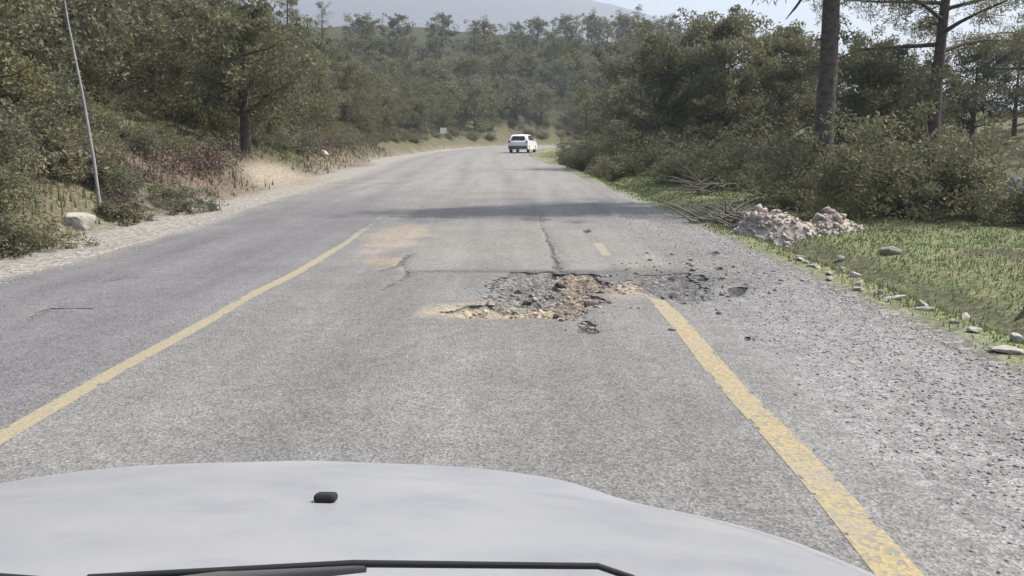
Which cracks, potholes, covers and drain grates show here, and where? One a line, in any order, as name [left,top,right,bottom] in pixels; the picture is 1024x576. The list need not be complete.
crack [539,213,569,274]
pothole [439,271,616,321]
crack [380,255,410,290]
pothole [727,287,749,297]
crack [25,308,94,321]
pothole [577,321,596,334]
pothole [615,273,708,304]
